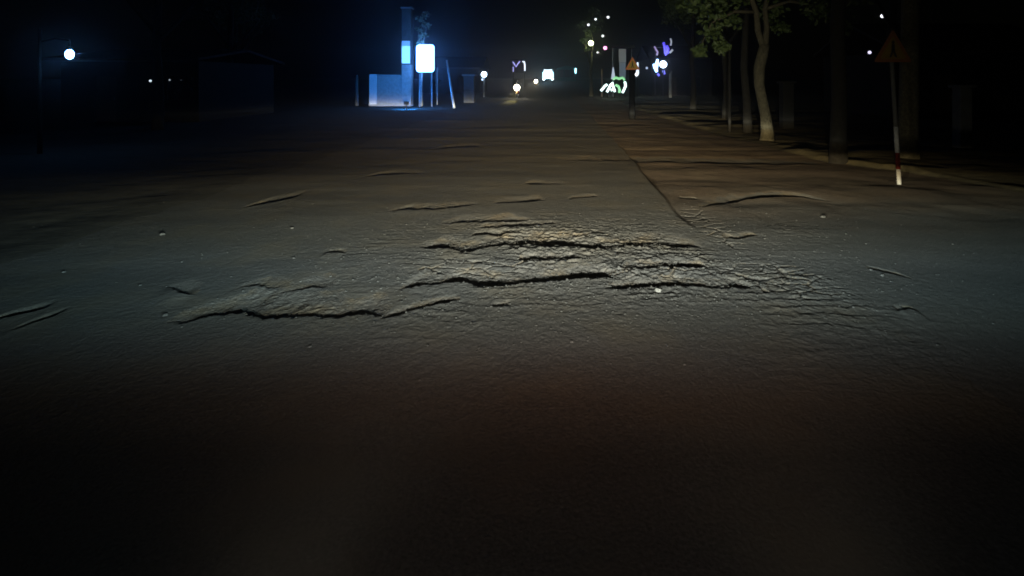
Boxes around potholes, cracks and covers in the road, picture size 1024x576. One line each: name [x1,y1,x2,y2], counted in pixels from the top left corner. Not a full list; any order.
crack [0,303,62,333]
crack [417,257,536,272]
crack [234,272,341,297]
crack [240,191,305,209]
crack [866,266,911,279]
crack [608,209,844,300]
crack [471,194,630,238]
